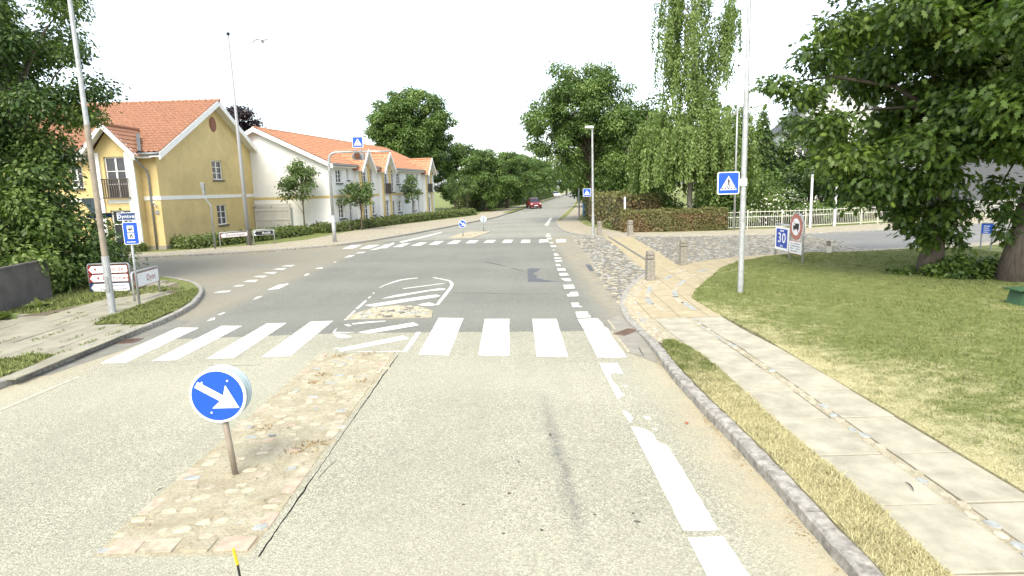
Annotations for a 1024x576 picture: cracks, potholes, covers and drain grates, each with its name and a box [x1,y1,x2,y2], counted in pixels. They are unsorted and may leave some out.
crack [258,356,398,557]
